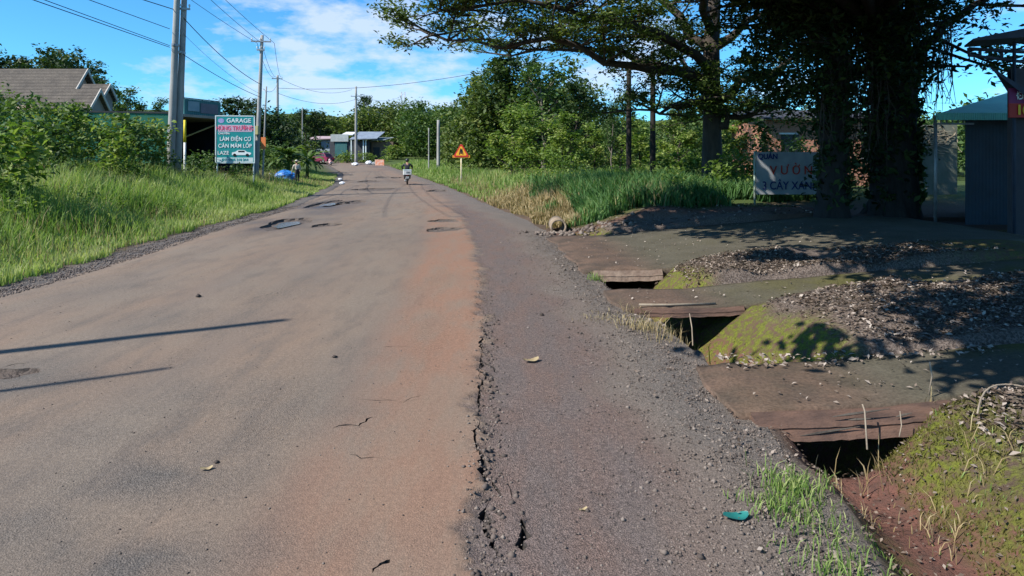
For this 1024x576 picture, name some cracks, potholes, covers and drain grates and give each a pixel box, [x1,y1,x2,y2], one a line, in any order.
pothole [304,200,348,208]
pothole [259,218,313,231]
crack [334,397,413,428]
crack [473,338,532,573]
pothole [0,368,42,379]
